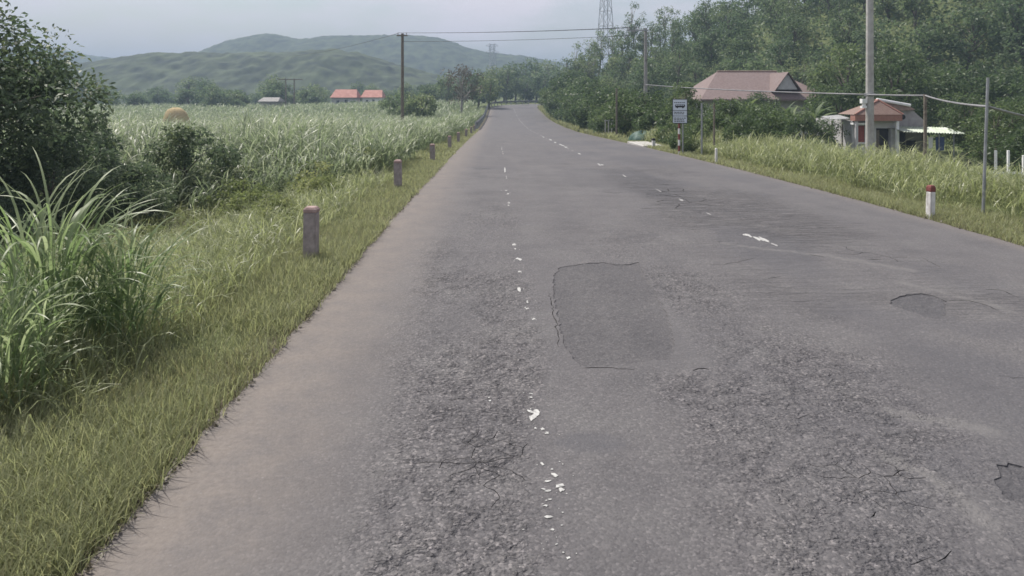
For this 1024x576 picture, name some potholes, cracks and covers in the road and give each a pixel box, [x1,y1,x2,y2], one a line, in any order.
crack [650,184,717,209]
crack [414,428,527,507]
pothole [994,463,1024,504]
crack [810,460,933,517]
